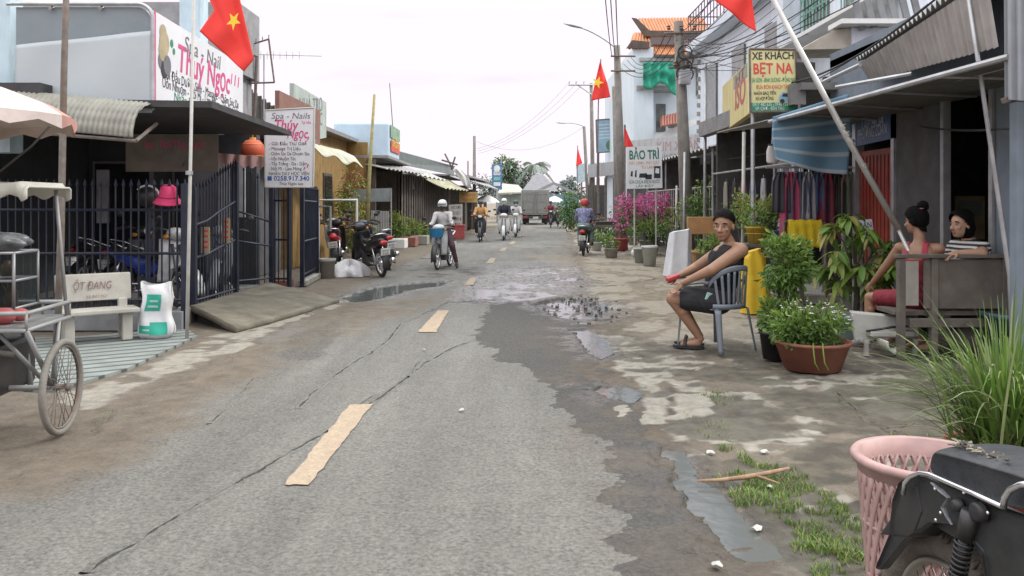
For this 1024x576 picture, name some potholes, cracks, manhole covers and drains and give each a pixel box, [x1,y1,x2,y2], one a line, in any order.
pothole [335,280,458,304]
pothole [522,295,634,326]
crack [80,301,488,574]
pothole [641,440,812,576]
